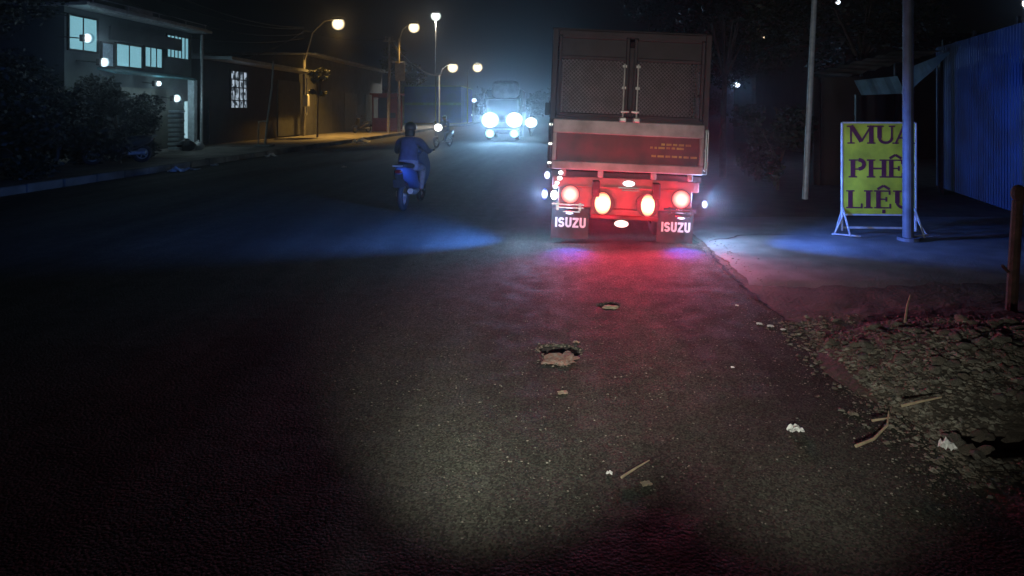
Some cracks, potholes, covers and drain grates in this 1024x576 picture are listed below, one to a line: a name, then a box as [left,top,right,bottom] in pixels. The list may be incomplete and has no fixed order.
pothole [540,347,581,356]
